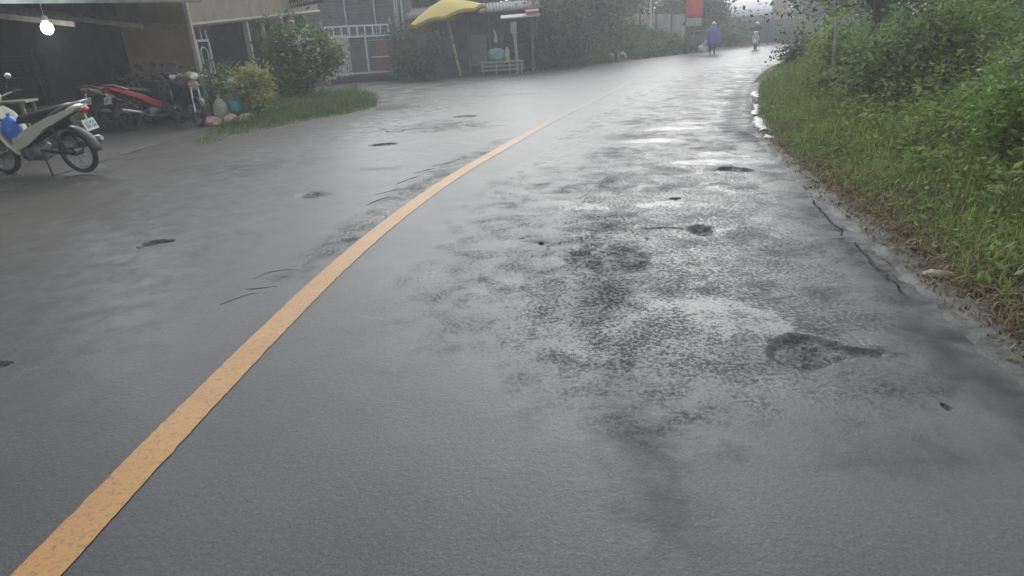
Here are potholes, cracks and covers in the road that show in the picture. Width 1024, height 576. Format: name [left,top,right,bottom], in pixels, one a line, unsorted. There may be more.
pothole [134,239,178,249]
pothole [684,224,718,237]
crack [220,269,294,305]
crack [813,200,907,296]
pothole [763,332,890,373]
pothole [292,191,334,199]
crack [368,160,457,205]
